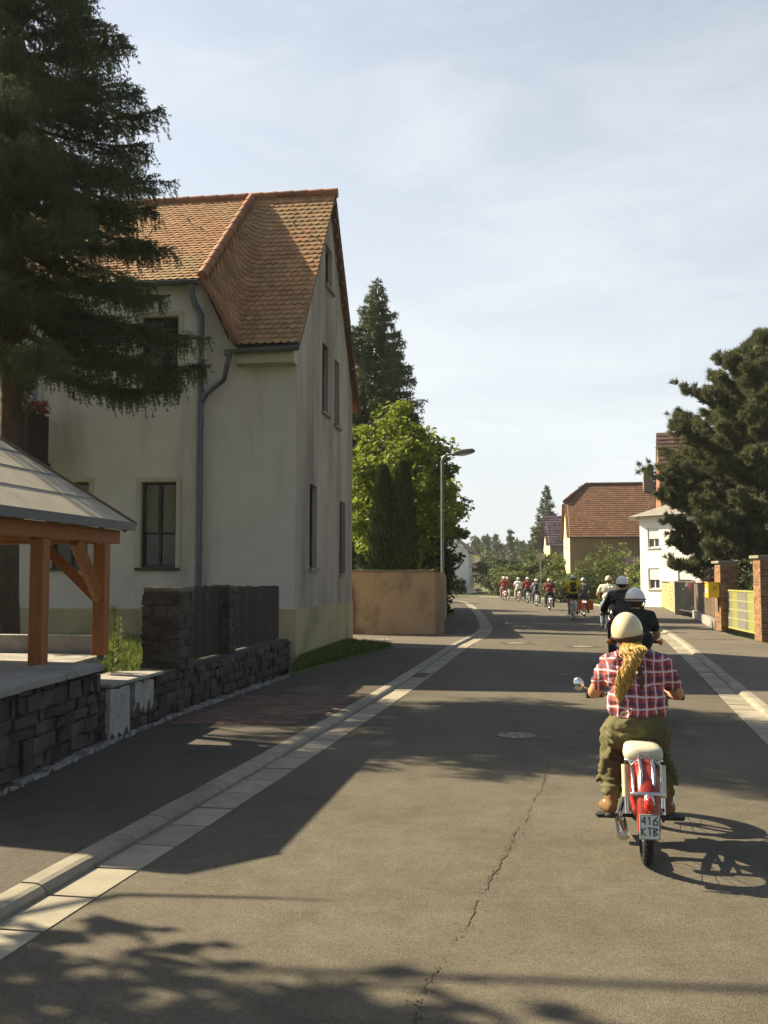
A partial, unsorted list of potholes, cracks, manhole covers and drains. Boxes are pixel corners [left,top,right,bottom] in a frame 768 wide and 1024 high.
crack [396,763,554,1024]
